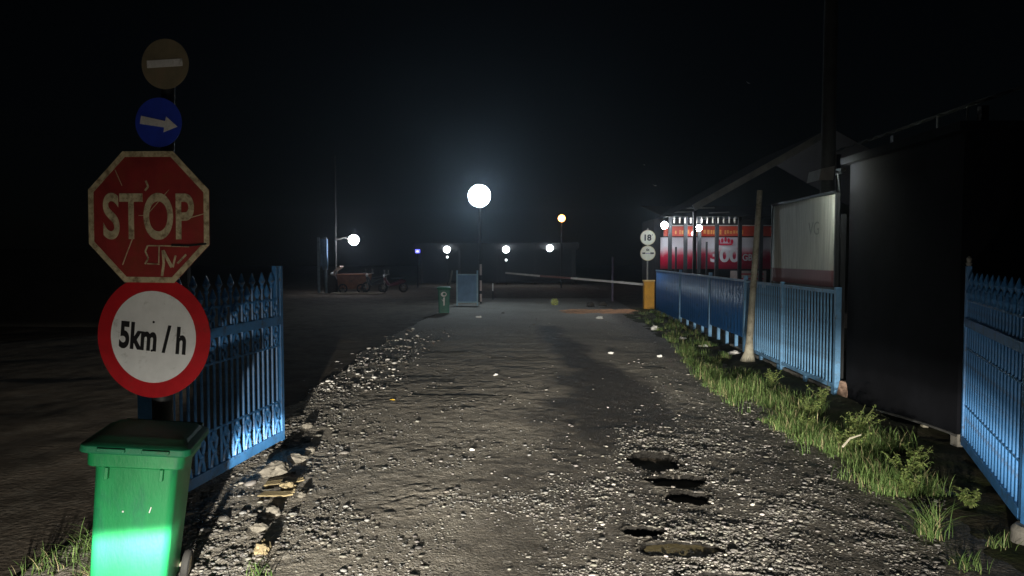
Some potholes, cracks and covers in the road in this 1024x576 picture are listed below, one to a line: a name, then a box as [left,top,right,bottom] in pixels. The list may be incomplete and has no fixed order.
pothole [659,488,717,508]
pothole [632,539,730,561]
pothole [618,524,672,539]
pothole [637,473,713,491]
pothole [618,450,686,476]
